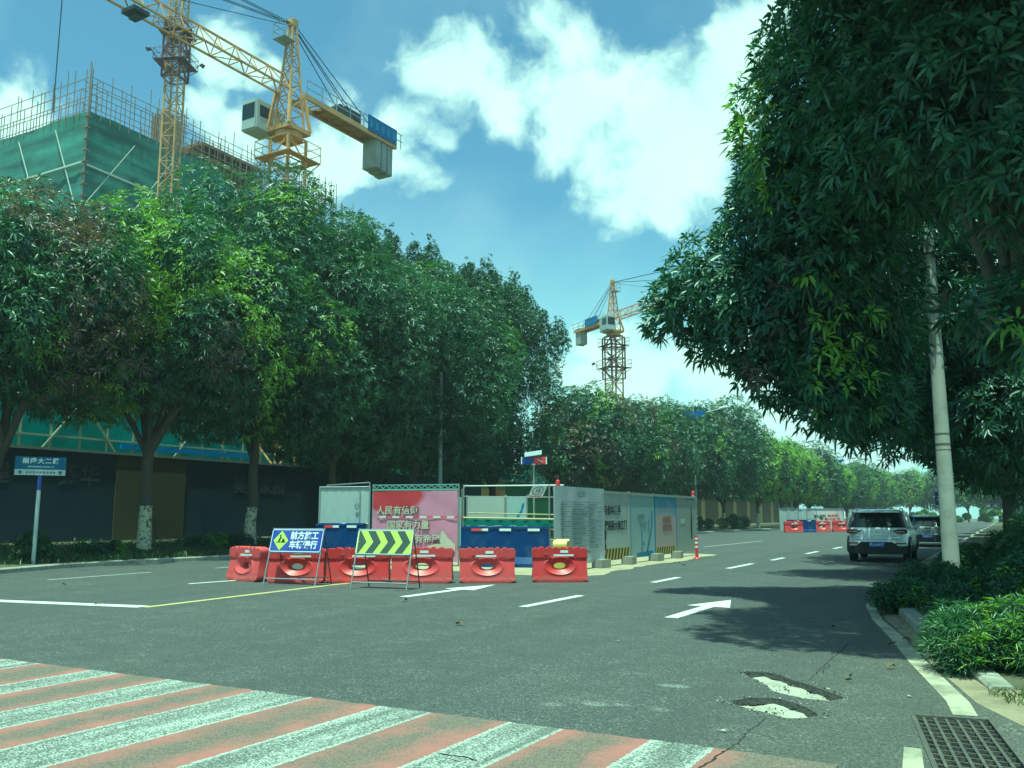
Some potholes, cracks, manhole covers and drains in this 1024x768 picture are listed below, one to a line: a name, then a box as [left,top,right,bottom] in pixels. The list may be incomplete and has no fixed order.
drain grate [911,714,1024,768]
pothole [716,694,829,721]
crack [699,644,848,768]
pothole [733,670,848,701]
